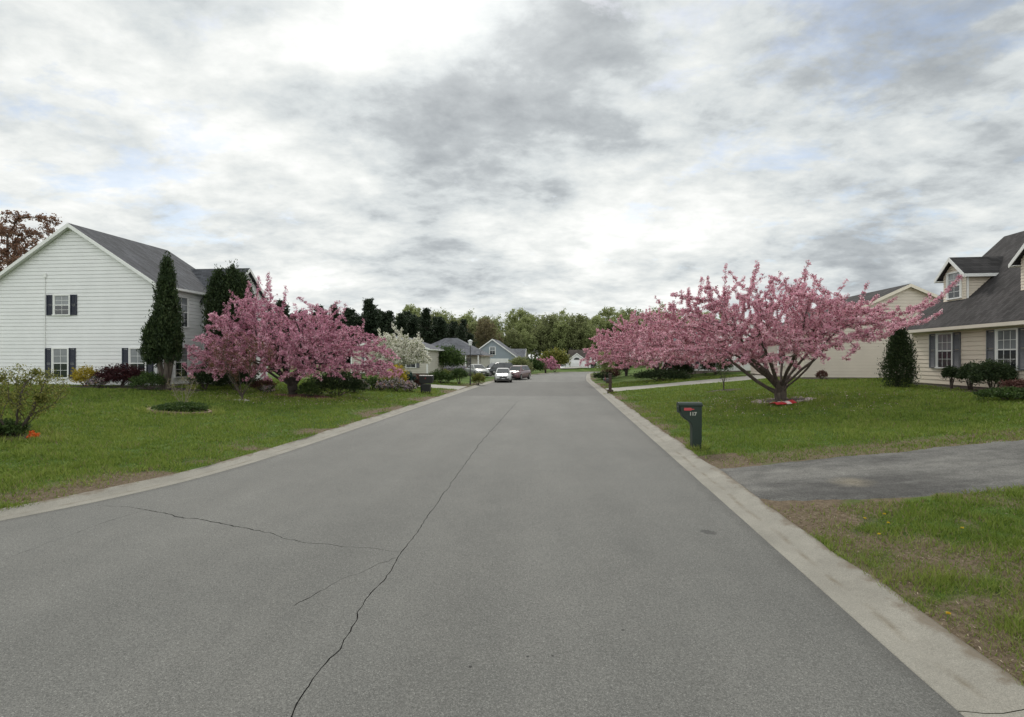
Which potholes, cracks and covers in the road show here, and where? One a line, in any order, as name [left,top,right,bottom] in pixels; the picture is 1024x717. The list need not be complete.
crack [6,403,516,717]
